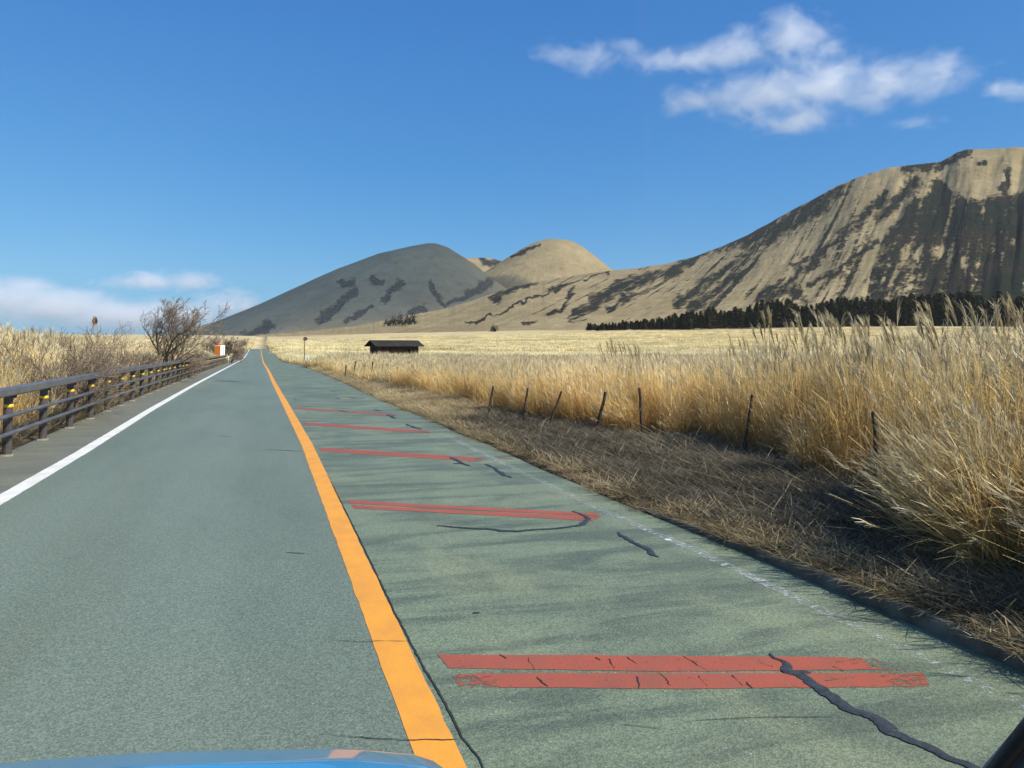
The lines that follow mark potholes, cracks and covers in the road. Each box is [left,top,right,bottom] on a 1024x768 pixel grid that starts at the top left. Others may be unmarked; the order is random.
crack [321,480,843,768]
